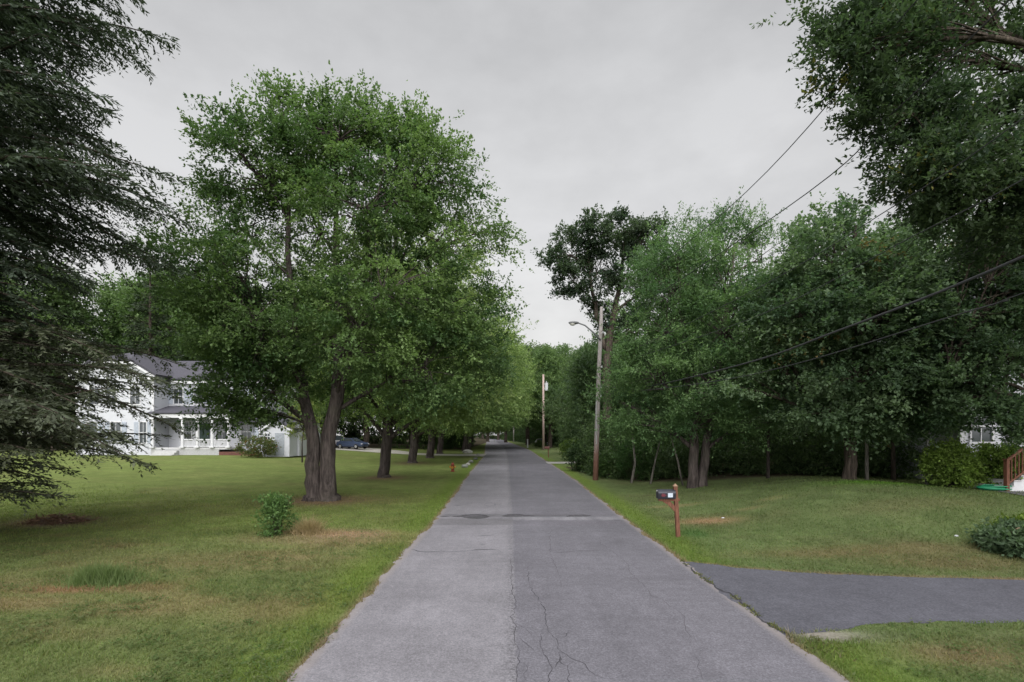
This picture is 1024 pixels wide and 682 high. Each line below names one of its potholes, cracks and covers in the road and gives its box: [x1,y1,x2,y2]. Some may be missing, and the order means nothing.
crack [415,535,594,682]
